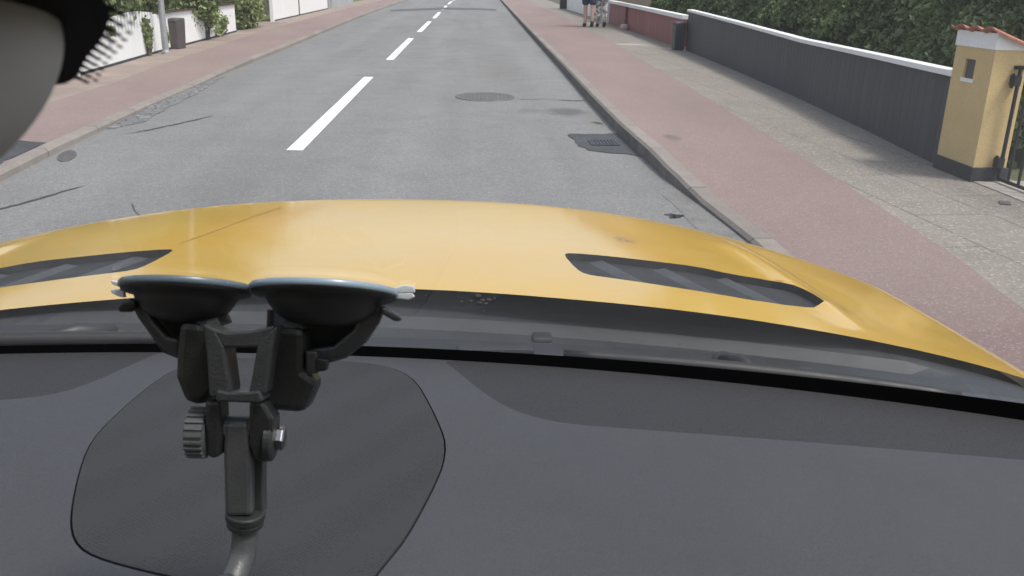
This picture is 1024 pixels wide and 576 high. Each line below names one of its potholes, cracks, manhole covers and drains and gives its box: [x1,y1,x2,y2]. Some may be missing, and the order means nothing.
manhole cover [455,92,515,102]
crack [0,178,88,209]
